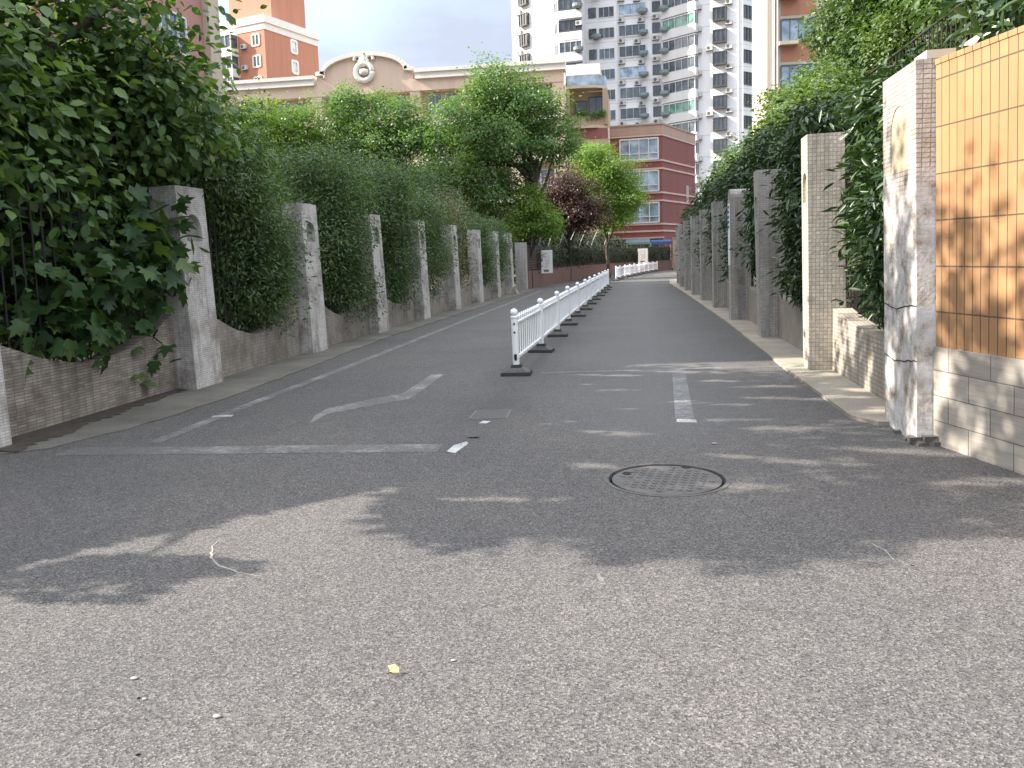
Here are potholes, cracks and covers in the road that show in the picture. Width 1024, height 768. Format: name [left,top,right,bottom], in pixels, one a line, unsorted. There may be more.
utility cover [468,409,511,419]
manhole cover [604,463,731,497]
